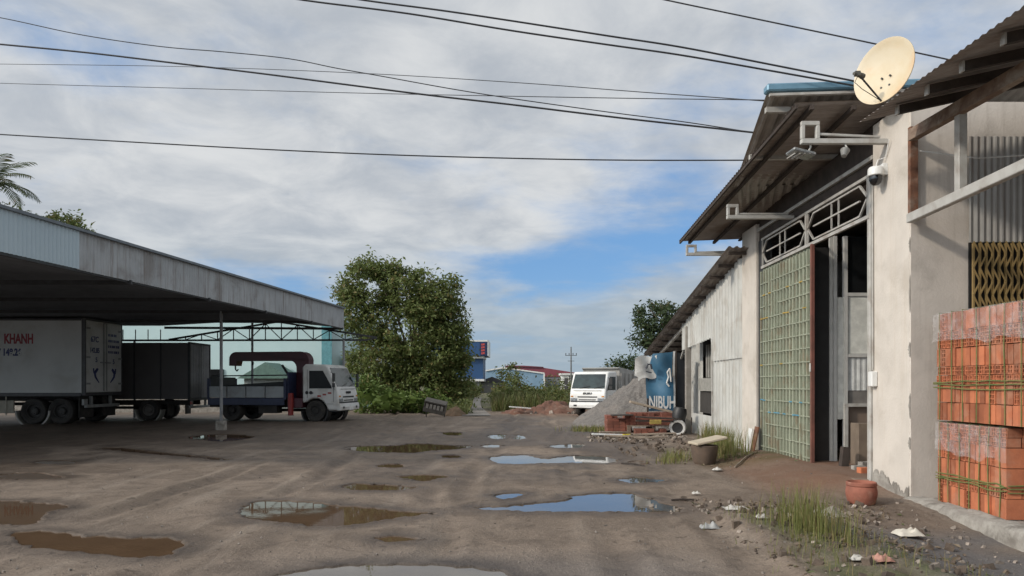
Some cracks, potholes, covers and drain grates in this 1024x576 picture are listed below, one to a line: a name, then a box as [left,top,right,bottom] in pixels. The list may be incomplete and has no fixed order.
pothole [180,434,259,442]
pothole [0,499,76,527]
pothole [0,528,194,560]
pothole [339,443,477,454]
pothole [469,492,690,514]
pothole [613,476,672,484]
pothole [335,482,422,492]
pothole [266,561,523,576]
pothole [485,454,624,465]
pothole [232,499,441,528]
pothole [389,474,453,482]
